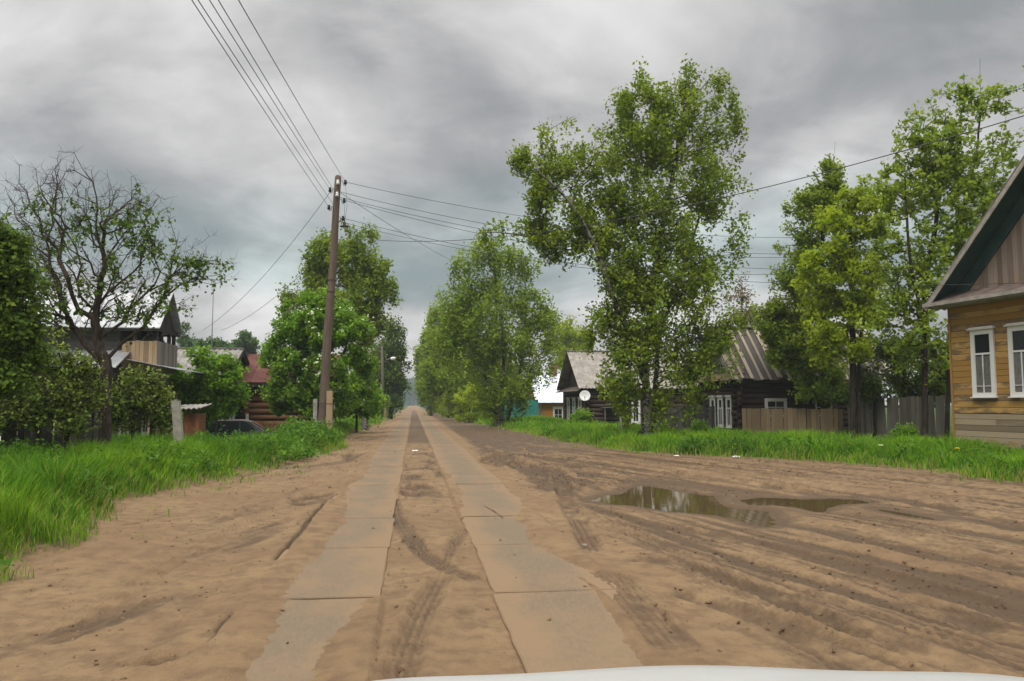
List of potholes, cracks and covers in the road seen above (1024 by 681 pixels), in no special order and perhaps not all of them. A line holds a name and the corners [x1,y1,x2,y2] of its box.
pothole [739,495,878,513]
pothole [581,484,791,528]
